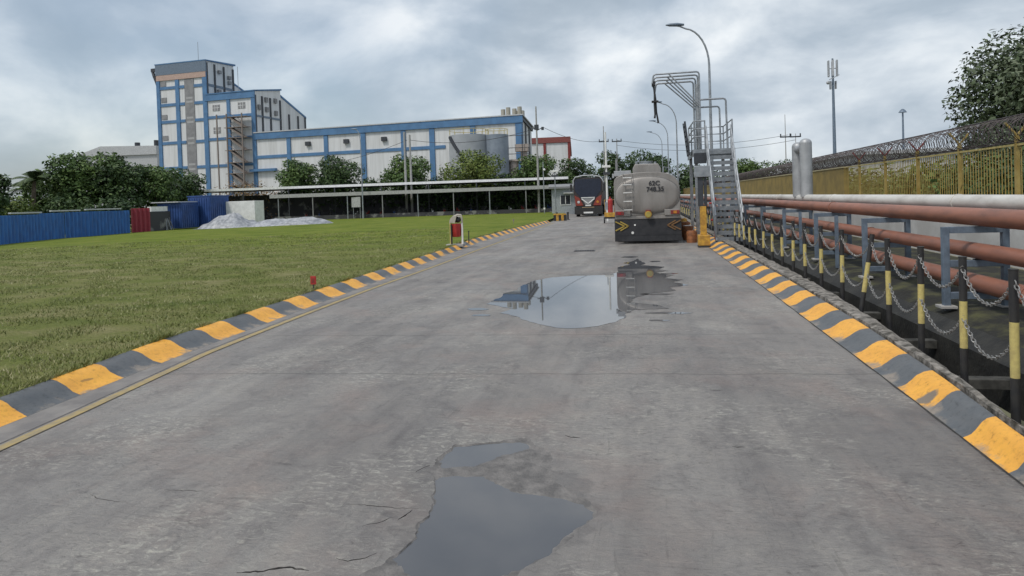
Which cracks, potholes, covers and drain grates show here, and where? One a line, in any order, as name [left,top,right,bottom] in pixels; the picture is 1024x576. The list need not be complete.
crack [348,504,412,526]
pothole [357,438,597,576]
